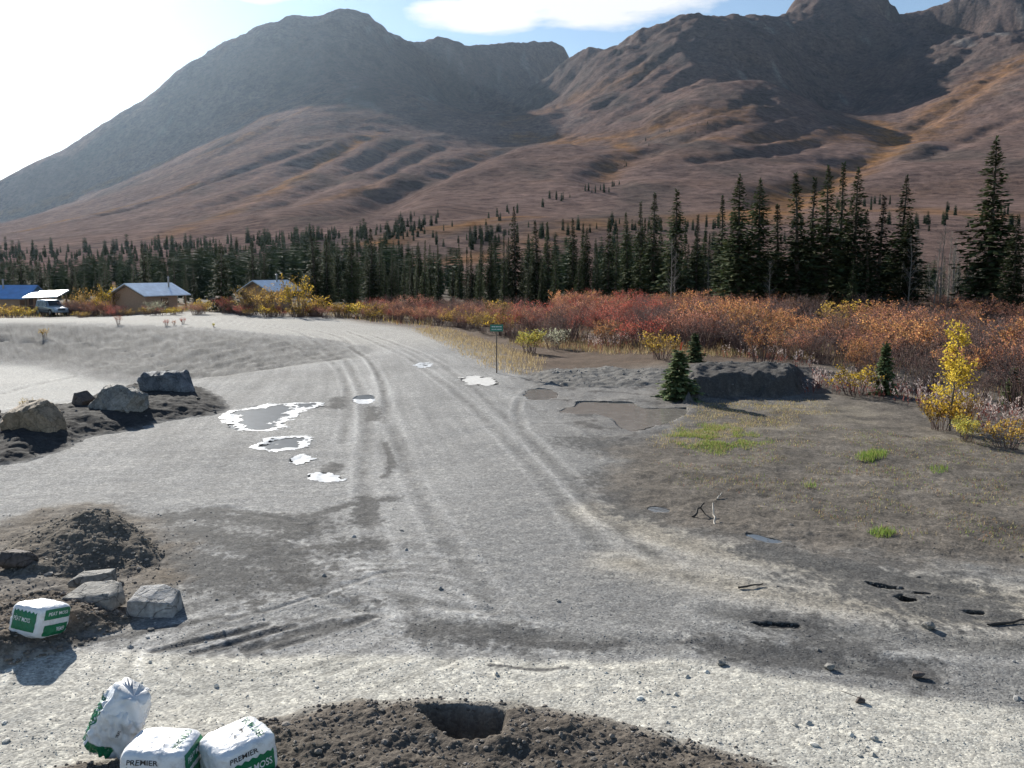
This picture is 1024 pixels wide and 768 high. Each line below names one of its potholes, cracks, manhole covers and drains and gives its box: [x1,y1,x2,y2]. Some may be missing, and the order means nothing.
pothole [244,434,318,453]
pothole [743,618,809,632]
pothole [955,608,994,618]
pothole [403,361,442,370]
pothole [887,592,926,605]
pothole [857,580,913,593]
pothole [213,401,334,434]
pothole [344,393,387,407]
pothole [282,453,319,466]
pothole [450,375,510,388]
pothole [301,471,349,484]
